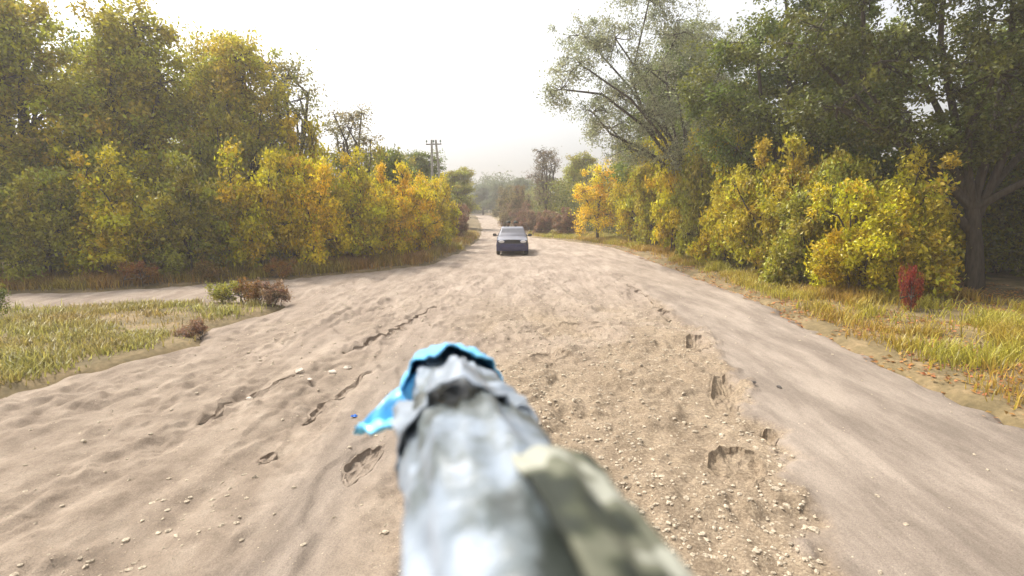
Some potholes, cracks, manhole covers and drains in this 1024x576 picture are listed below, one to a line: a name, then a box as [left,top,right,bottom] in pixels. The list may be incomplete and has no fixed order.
crack [199,371,370,426]
crack [343,306,437,354]
